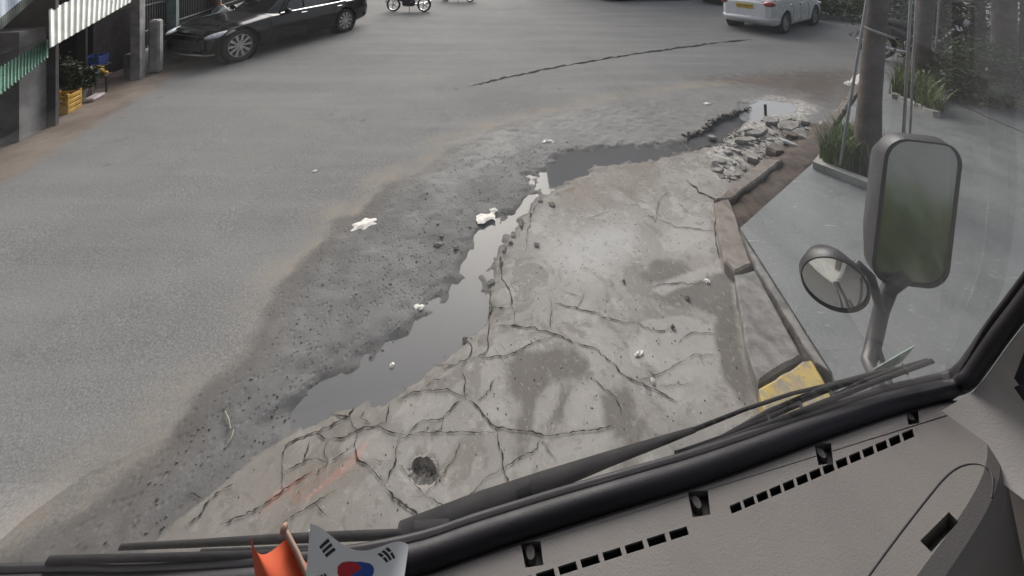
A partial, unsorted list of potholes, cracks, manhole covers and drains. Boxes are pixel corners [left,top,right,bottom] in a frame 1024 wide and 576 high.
pothole [681,106,752,151]
pothole [407,451,441,485]
crack [472,39,749,86]
crack [647,180,723,265]
crack [185,269,714,530]
